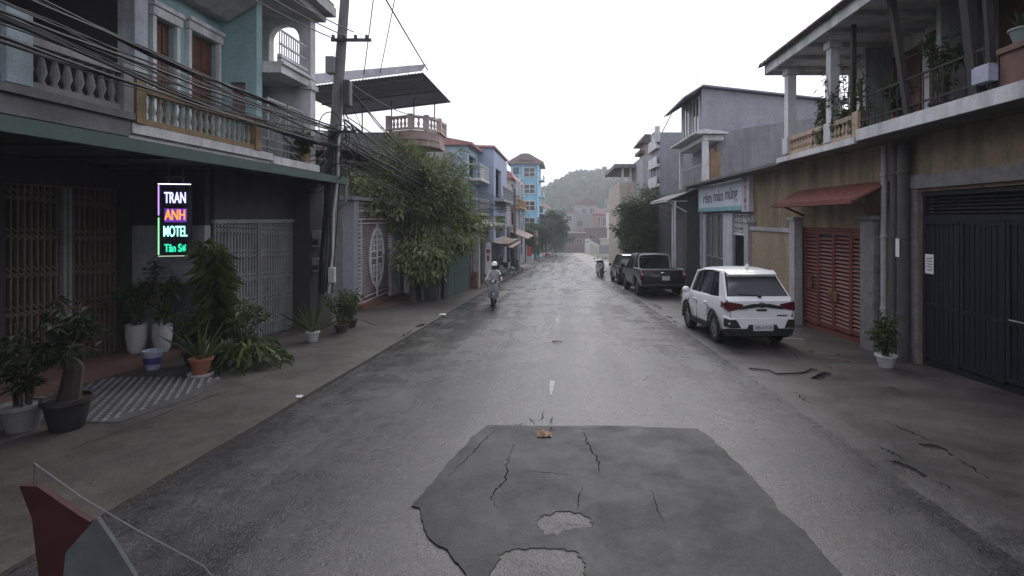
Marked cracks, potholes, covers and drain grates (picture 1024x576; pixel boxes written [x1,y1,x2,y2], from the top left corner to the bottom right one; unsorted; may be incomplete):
pothole [489,547,586,576]
pothole [537,511,593,535]
crack [536,428,614,507]
crack [452,430,514,508]
